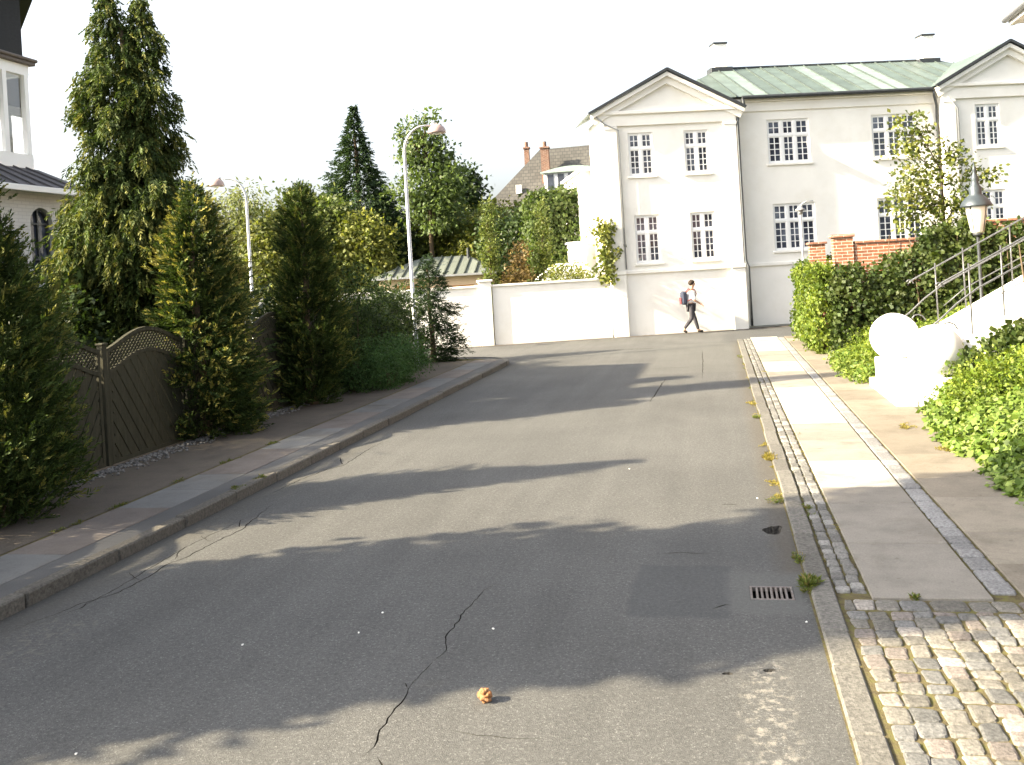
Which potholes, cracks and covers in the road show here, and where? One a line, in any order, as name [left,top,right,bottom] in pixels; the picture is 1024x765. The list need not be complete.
drain grate [749,586,795,600]
pothole [762,526,782,535]
crack [49,509,267,617]
crack [367,585,493,765]
